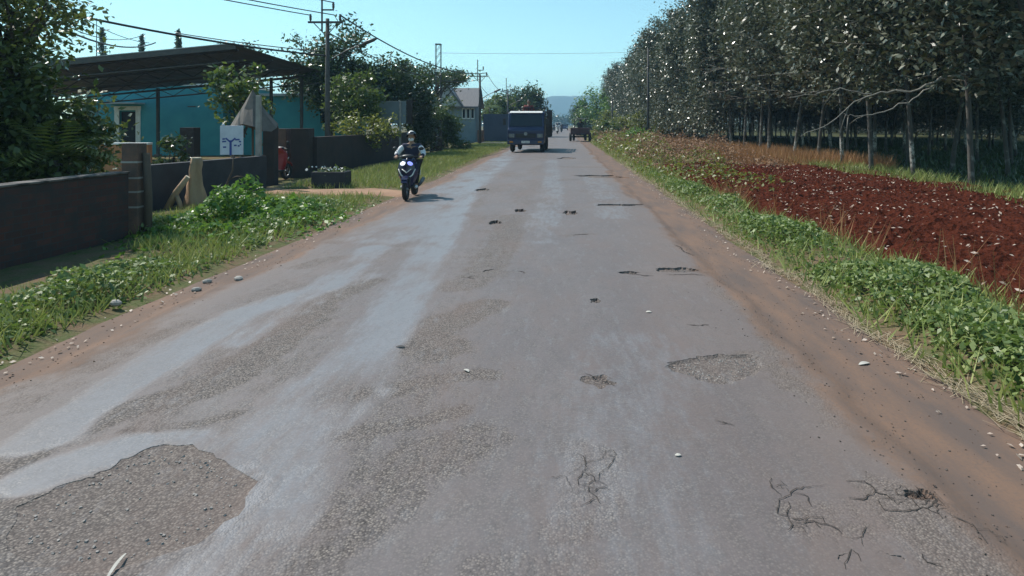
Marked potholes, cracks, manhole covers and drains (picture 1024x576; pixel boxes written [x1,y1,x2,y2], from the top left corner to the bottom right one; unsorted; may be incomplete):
crack [769,478,866,569]
pothole [477,219,513,227]
pothole [551,209,589,217]
pothole [0,434,284,576]
crack [846,480,1004,542]
pothole [646,348,783,393]
pothole [641,265,718,276]
pothole [604,268,652,278]
crack [552,450,616,506]
